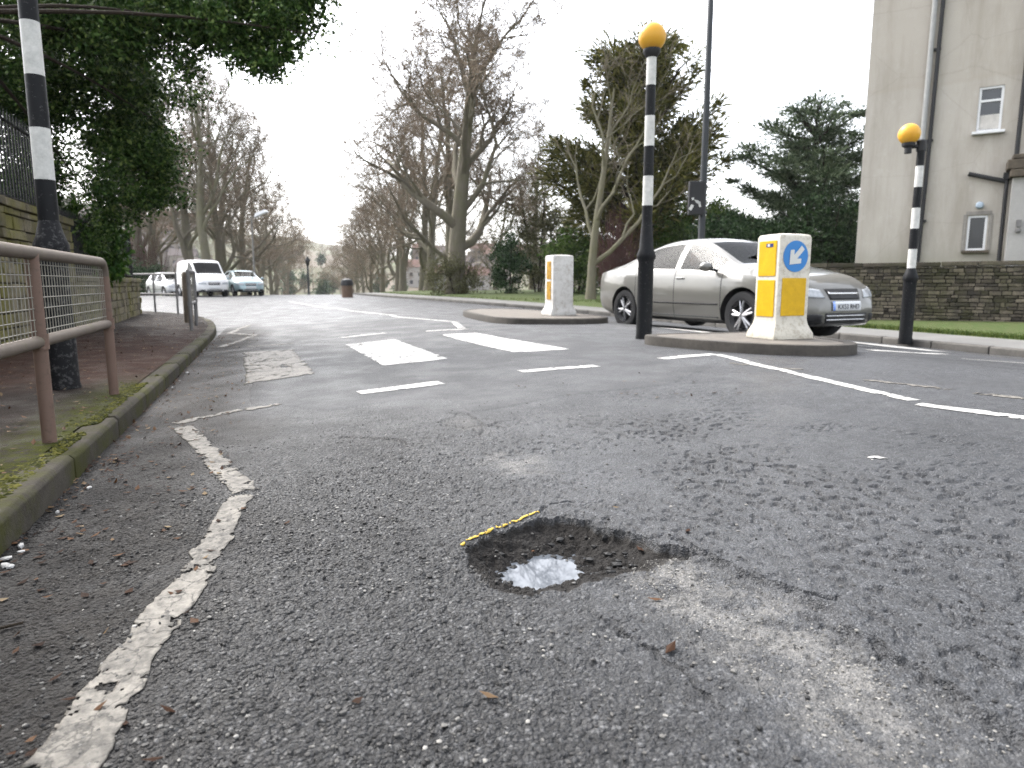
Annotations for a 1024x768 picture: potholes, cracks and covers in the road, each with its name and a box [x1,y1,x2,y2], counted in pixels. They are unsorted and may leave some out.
pothole [464,515,700,597]
